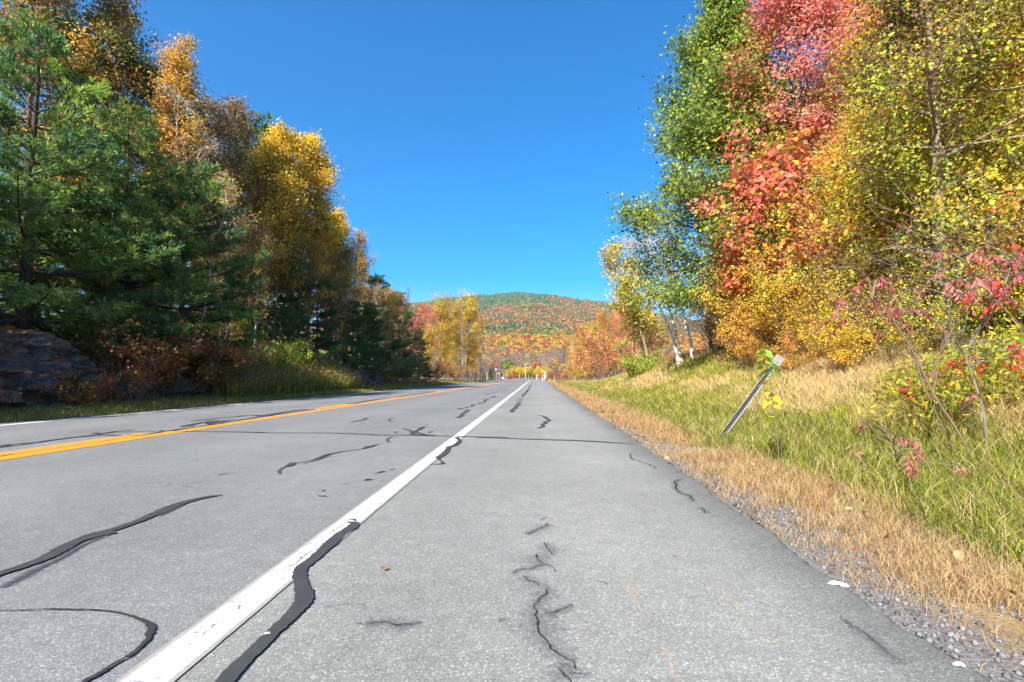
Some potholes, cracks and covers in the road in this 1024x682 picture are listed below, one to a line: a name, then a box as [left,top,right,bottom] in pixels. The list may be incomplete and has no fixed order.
crack [498,517,606,682]
